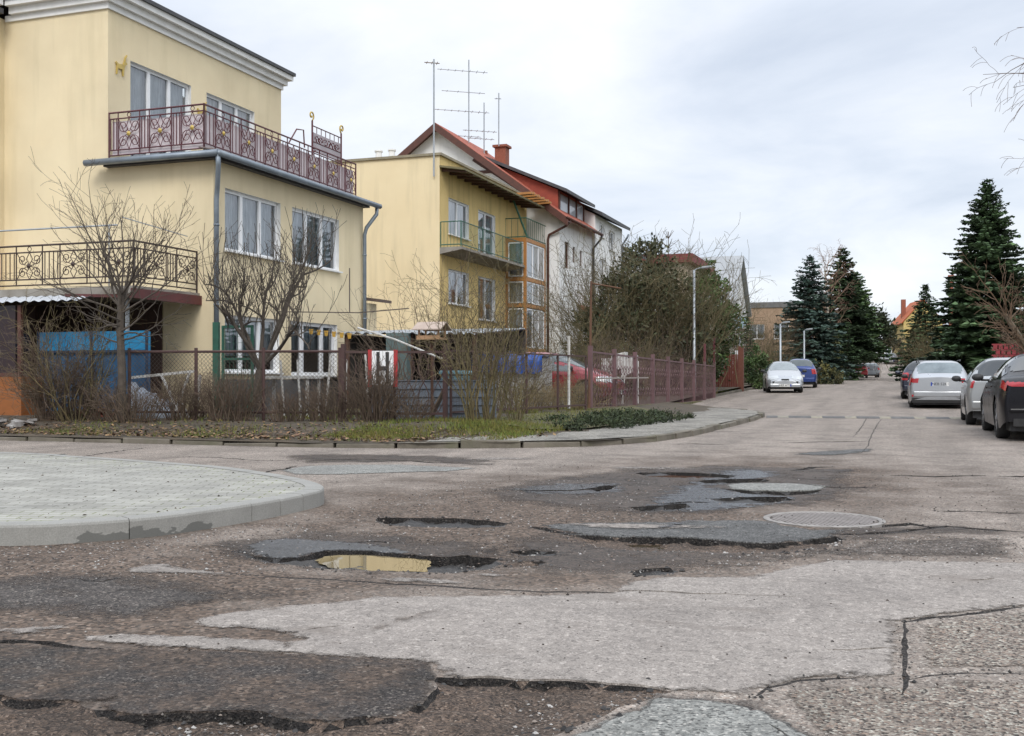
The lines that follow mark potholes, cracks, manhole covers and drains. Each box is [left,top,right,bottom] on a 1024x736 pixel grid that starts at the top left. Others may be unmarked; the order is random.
pothole [0,677,671,736]
crack [894,606,1024,695]
pothole [377,517,510,528]
crack [841,511,1020,535]
pothole [632,568,678,576]
crack [795,418,880,453]
crack [751,677,864,698]
manhole cover [763,511,886,529]
pothole [233,550,503,573]
